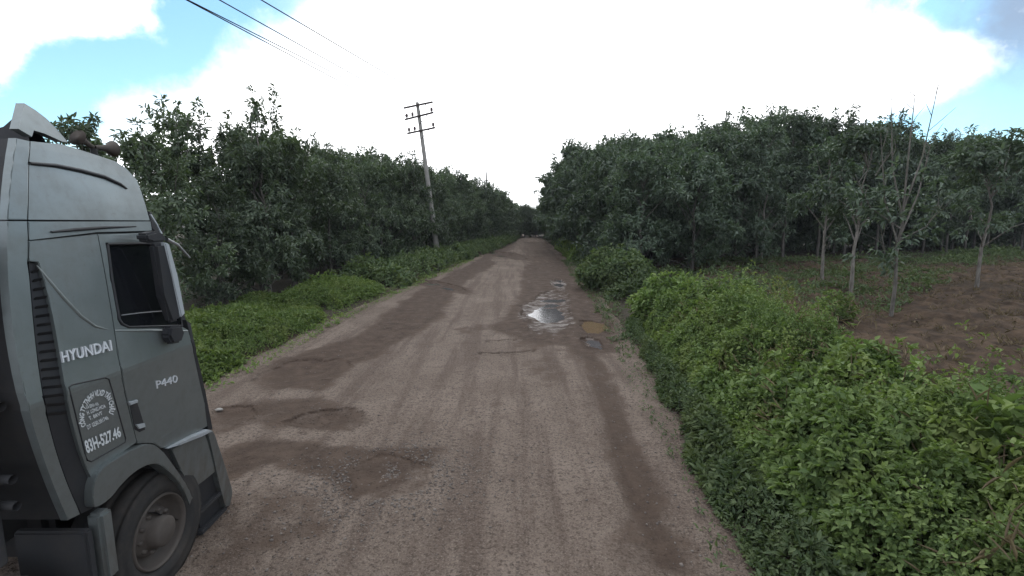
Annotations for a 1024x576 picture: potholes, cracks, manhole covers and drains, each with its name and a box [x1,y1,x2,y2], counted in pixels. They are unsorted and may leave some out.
pothole [344,450,441,505]
crack [482,338,532,356]
pothole [276,406,373,433]
pothole [573,319,614,334]
pothole [515,288,581,339]
pothole [548,278,568,292]
pothole [578,335,605,351]
